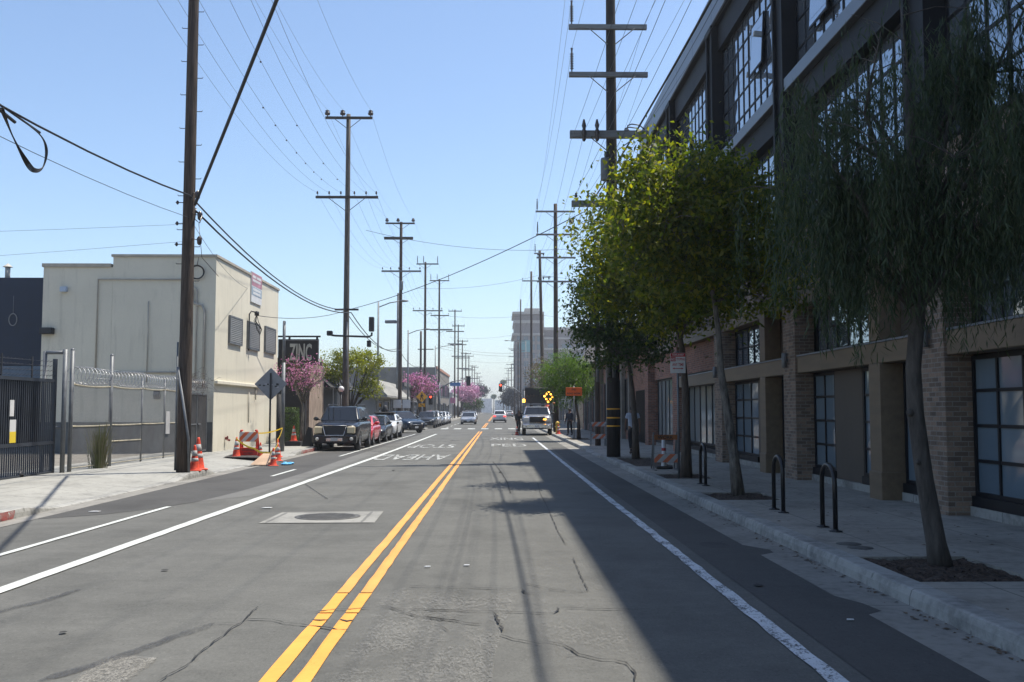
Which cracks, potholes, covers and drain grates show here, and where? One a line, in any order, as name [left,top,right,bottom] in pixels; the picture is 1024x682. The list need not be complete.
crack [156,486,637,682]
manhole cover [260,511,383,523]
